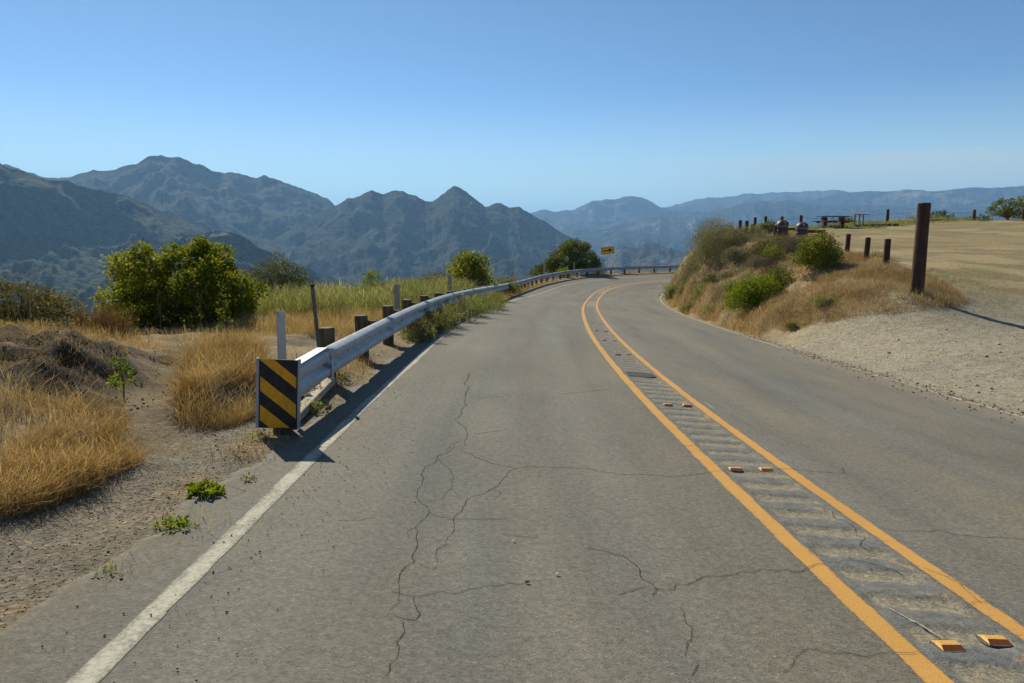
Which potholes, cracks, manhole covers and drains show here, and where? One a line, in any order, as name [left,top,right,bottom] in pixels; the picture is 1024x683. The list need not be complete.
crack [783,648,924,672]
crack [522,466,844,477]
crack [386,373,537,676]
